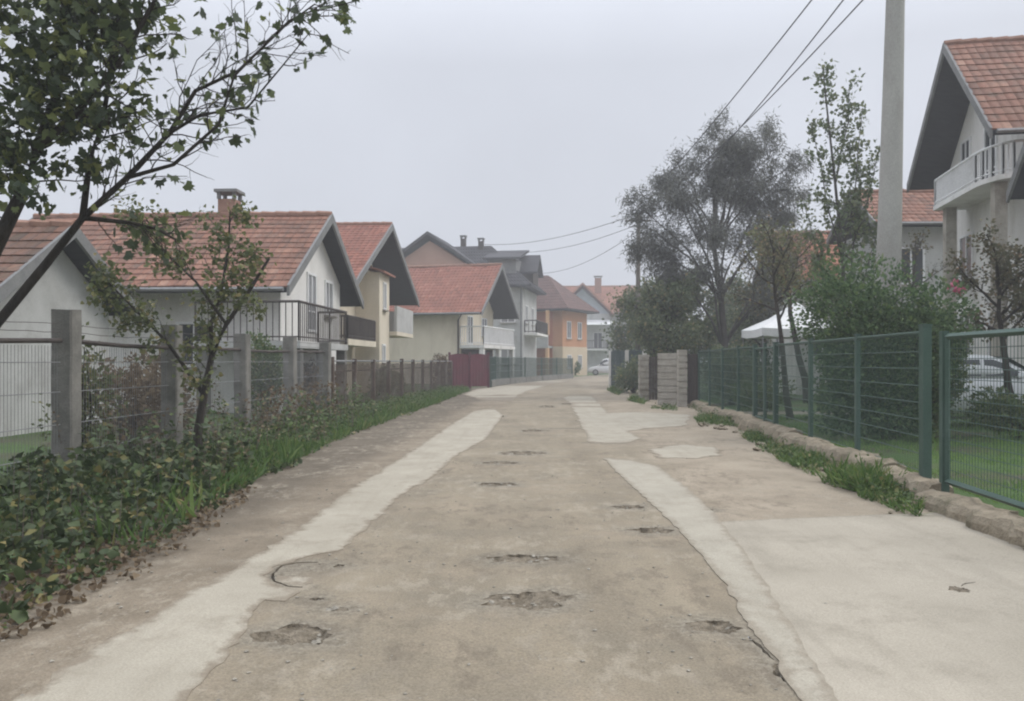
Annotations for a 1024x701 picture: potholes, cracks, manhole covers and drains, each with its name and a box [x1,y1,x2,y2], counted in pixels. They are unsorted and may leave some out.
pothole [685,620,744,634]
pothole [486,554,560,563]
crack [271,562,318,587]
pothole [249,623,333,646]
pothole [480,591,575,611]
